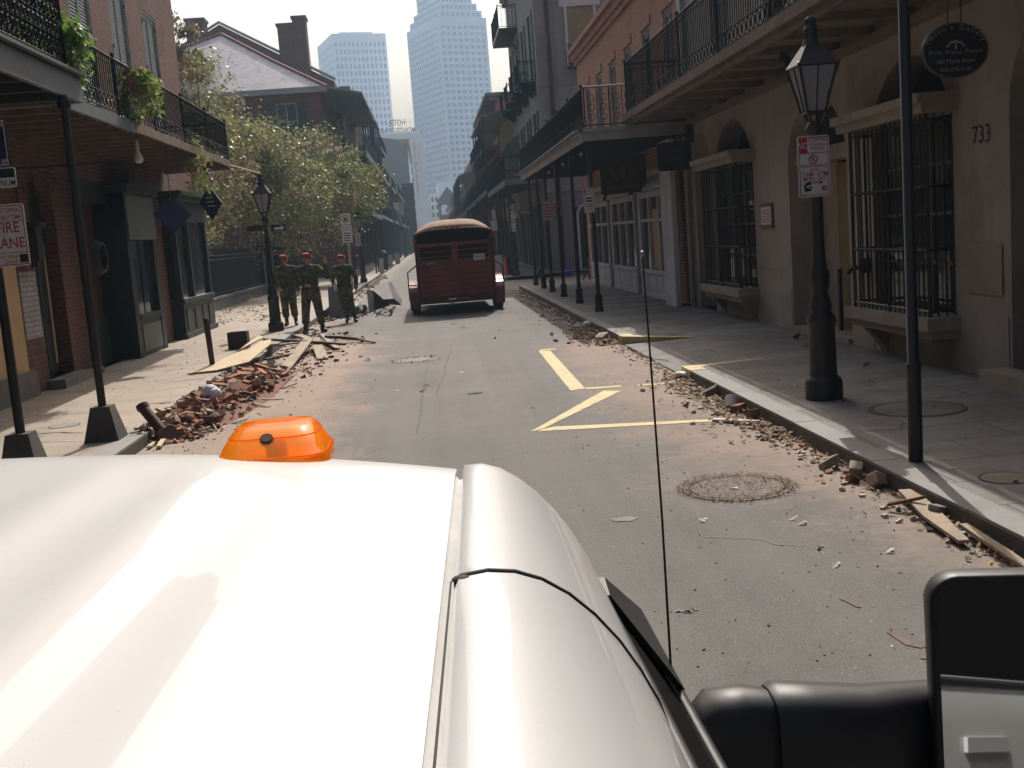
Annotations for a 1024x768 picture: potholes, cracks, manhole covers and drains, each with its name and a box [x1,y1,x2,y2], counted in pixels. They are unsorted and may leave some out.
manhole cover [868,401,968,417]
utility cover [978,472,1024,484]
manhole cover [675,471,800,501]
